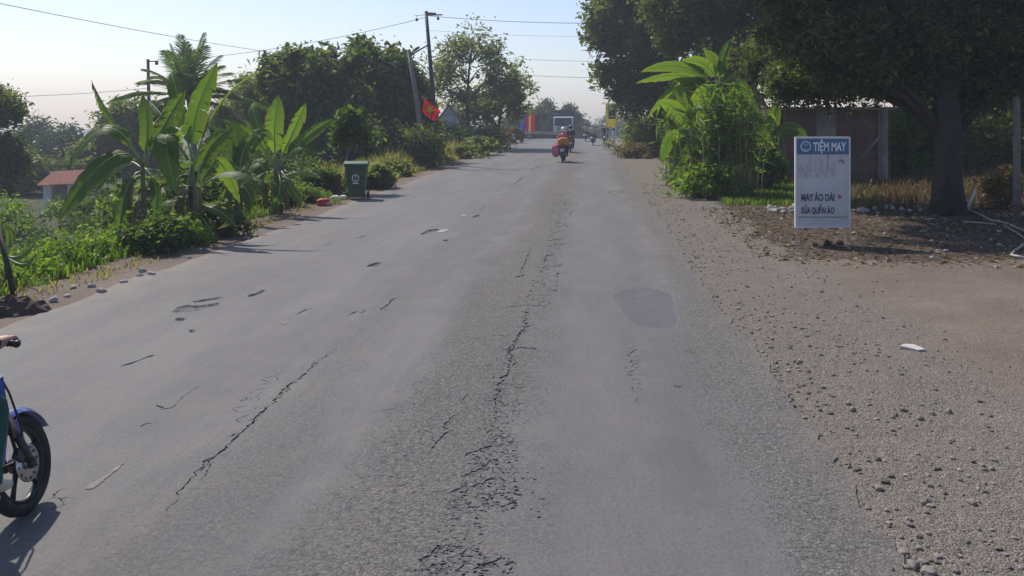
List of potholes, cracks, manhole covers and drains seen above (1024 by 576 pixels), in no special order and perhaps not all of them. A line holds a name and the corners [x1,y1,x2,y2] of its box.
crack [349,180,575,576]
pothole [172,302,220,313]
crack [166,350,336,518]
